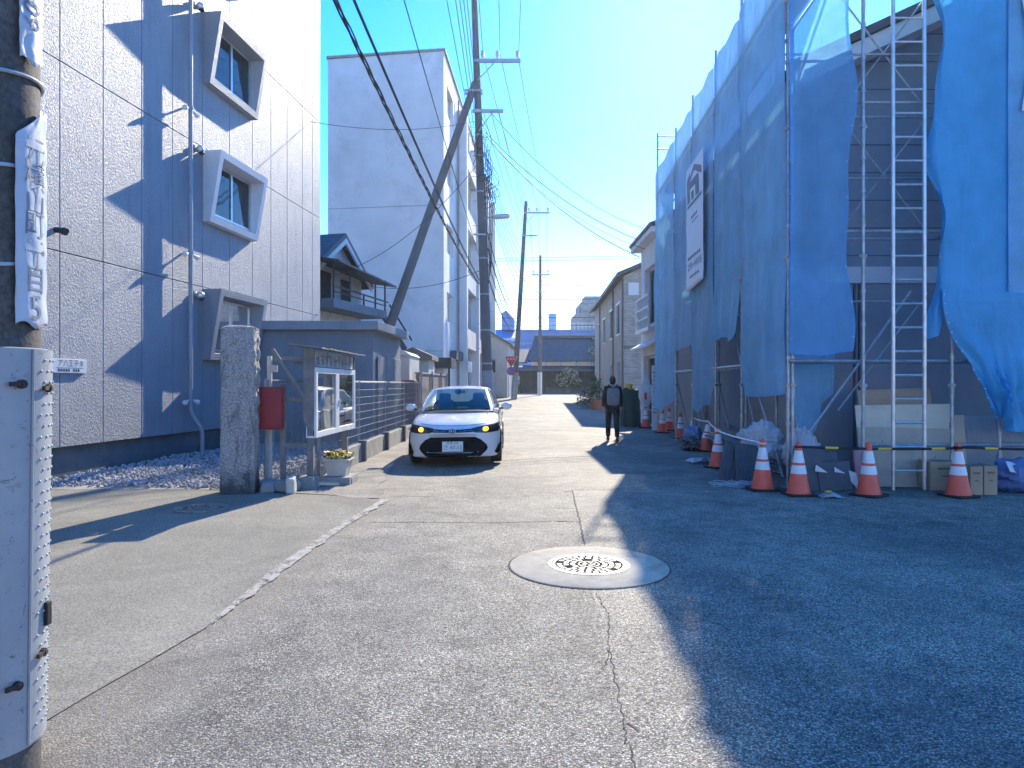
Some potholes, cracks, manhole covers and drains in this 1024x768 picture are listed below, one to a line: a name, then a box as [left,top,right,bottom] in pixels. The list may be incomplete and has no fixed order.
manhole cover [508,546,671,589]
crack [595,592,640,768]
crack [563,491,586,544]
manhole cover [173,503,229,513]
